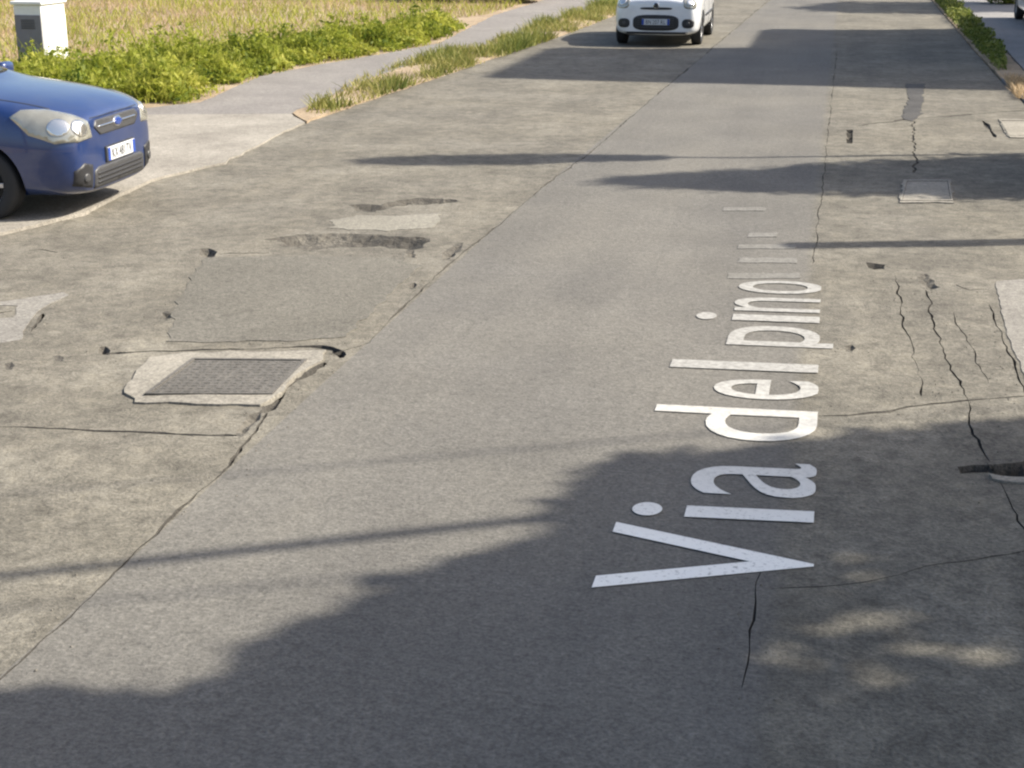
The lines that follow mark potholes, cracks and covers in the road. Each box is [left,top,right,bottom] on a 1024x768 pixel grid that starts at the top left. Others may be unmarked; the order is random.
crack [824,280,1024,529]
crack [741,551,1024,688]
pothole [349,198,459,212]
pothole [917,273,940,291]
pothole [958,461,1024,477]
crack [23,427,237,437]
manhole cover [124,350,326,407]
pothole [265,233,431,258]
